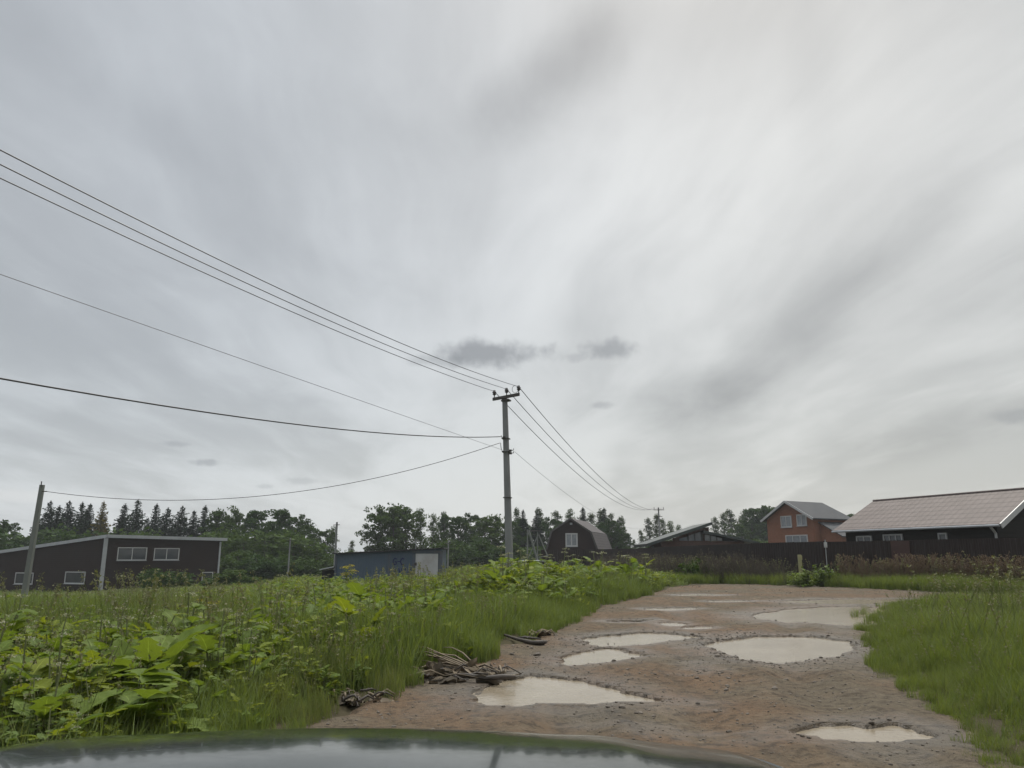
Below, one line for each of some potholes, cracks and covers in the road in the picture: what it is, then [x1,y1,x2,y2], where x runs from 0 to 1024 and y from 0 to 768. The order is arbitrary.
pothole [461,674,676,707]
pothole [556,646,647,667]
pothole [575,632,706,648]
pothole [704,634,865,666]
pothole [791,720,951,744]
pothole [747,606,885,626]
